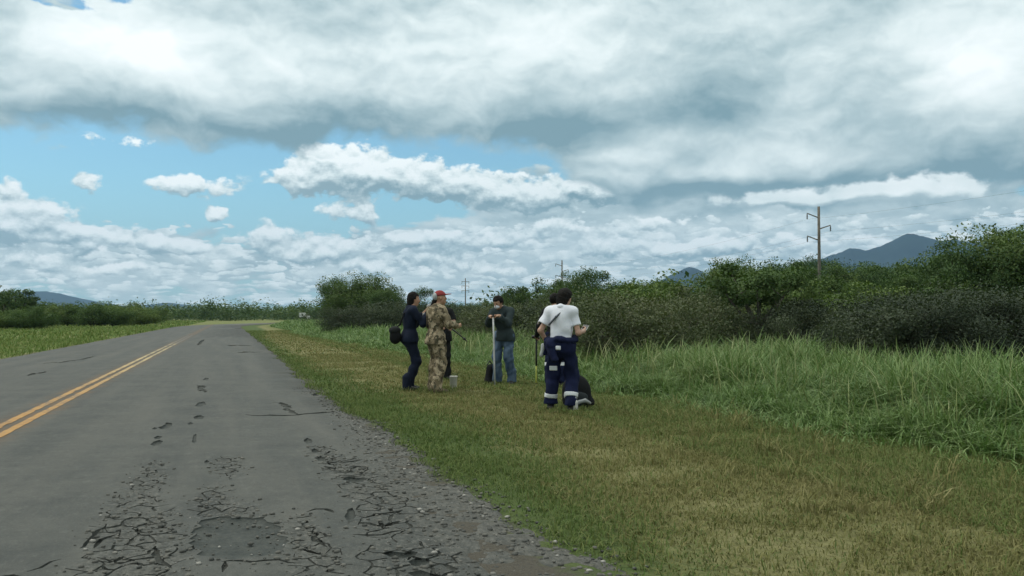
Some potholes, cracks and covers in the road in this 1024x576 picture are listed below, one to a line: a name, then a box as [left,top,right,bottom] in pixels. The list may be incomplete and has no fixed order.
crack [245,402,334,416]
crack [65,462,194,576]
pothole [189,516,289,560]
crack [221,446,476,576]
